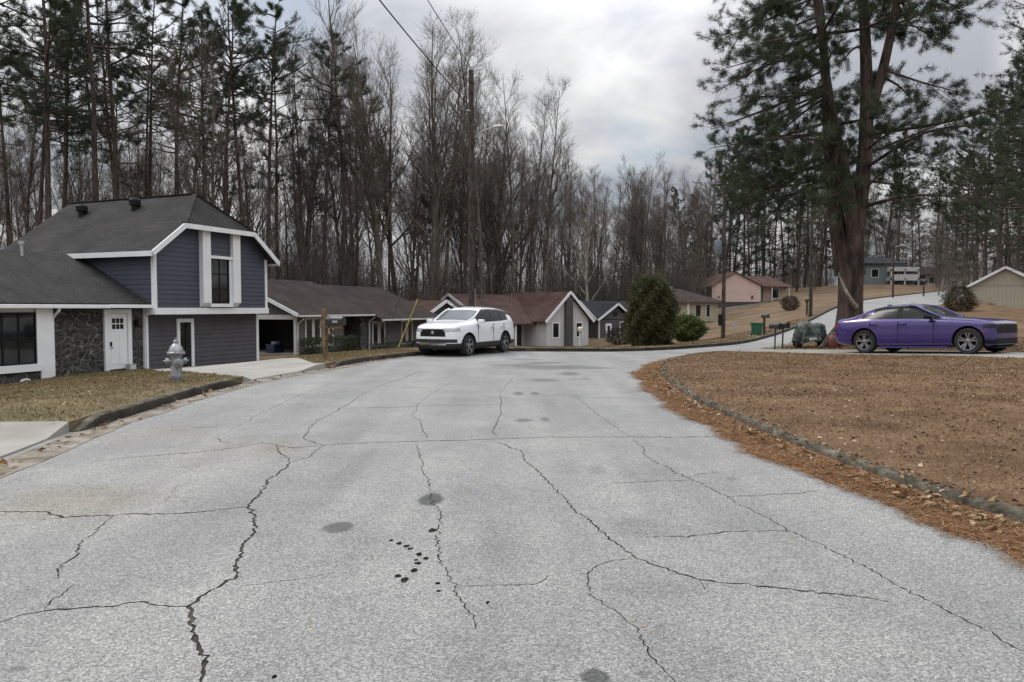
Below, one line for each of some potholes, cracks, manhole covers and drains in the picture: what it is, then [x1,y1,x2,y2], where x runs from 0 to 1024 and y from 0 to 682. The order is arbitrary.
crack [0,373,710,682]
crack [498,440,1024,682]
